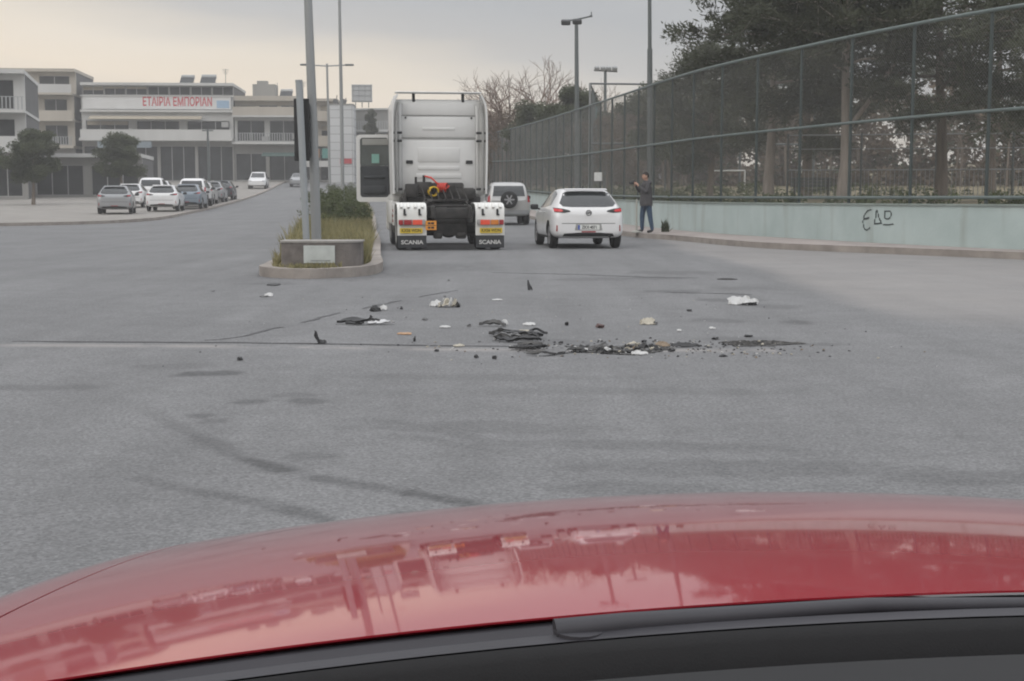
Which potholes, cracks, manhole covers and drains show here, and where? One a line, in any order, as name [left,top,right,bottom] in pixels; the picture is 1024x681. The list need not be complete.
crack [214,290,456,340]
pothole [587,345,675,355]
